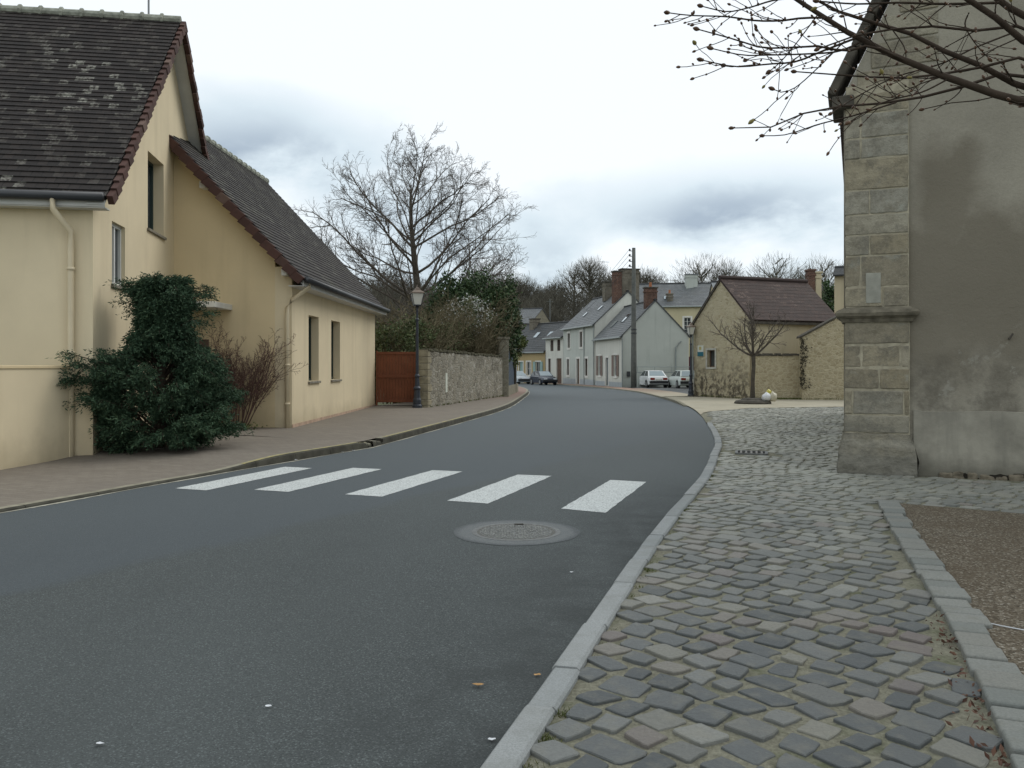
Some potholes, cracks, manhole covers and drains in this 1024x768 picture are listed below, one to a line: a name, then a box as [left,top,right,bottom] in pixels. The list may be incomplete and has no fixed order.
manhole cover [454,520,580,546]
